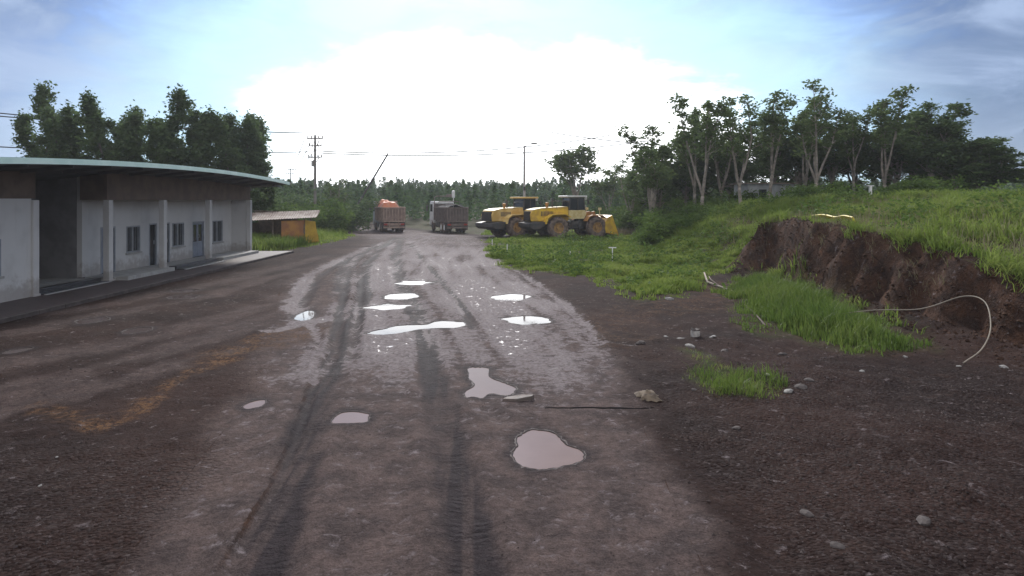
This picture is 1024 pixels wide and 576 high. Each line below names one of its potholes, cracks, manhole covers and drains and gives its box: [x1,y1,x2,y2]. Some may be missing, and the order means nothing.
pothole [365,320,467,335]
pothole [499,315,552,325]
pothole [490,293,532,301]
pothole [463,366,518,399]
pothole [510,428,586,470]
pothole [294,310,316,321]
pothole [331,411,371,424]
pothole [240,399,267,409]
